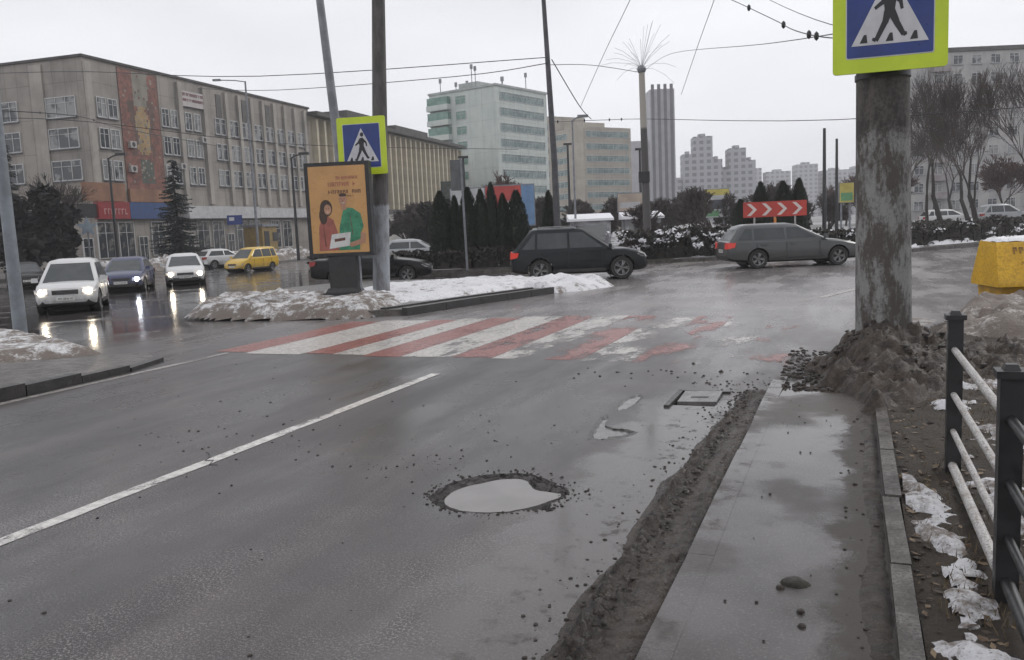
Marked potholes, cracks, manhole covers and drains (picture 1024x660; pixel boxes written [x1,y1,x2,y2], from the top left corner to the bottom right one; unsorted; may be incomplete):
pothole [586,414,638,441]
pothole [428,473,570,514]
pothole [613,393,644,412]
